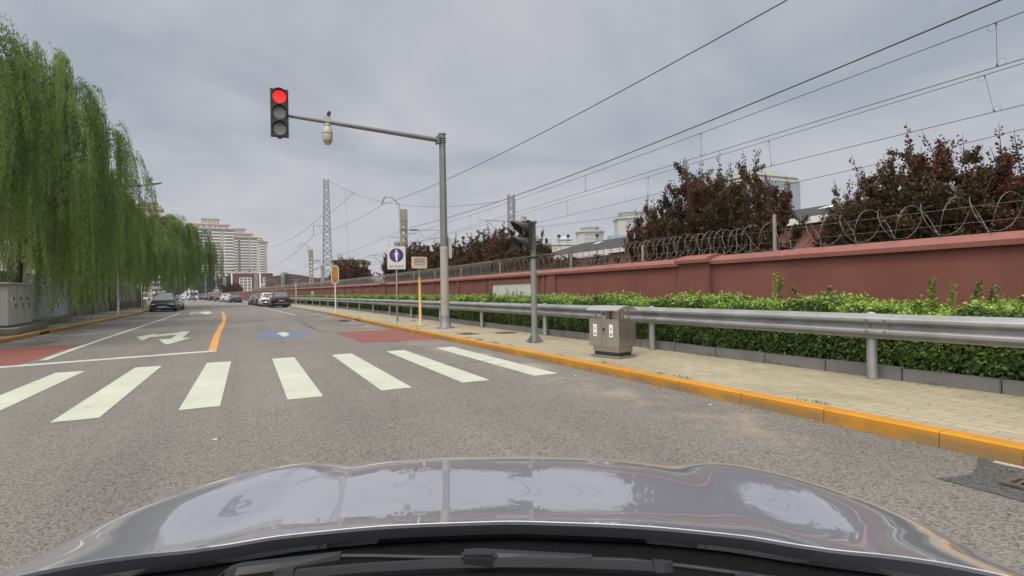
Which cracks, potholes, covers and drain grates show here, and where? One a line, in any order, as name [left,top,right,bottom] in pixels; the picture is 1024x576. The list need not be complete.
drain grate [999,473,1024,490]
